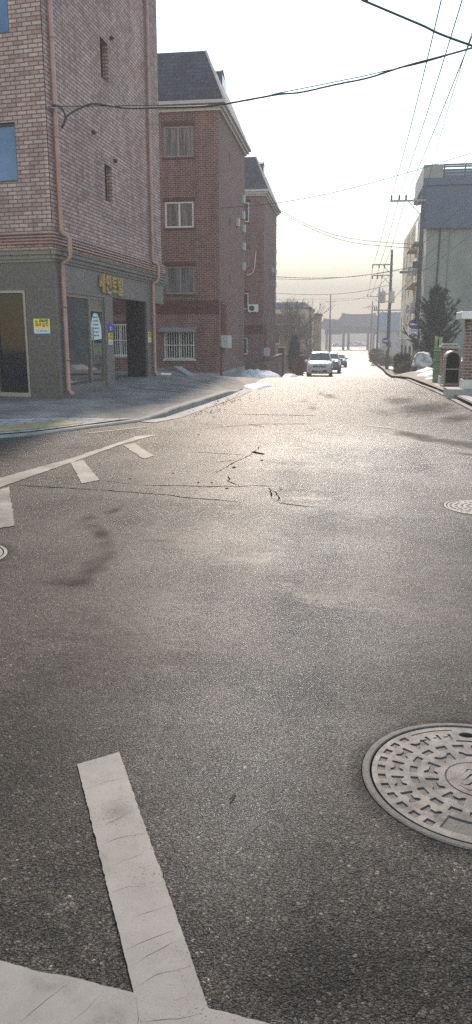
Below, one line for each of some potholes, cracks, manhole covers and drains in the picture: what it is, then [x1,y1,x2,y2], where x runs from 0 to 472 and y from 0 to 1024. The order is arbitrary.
manhole cover [362,723,472,851]
manhole cover [444,499,472,515]
crack [21,446,308,507]
